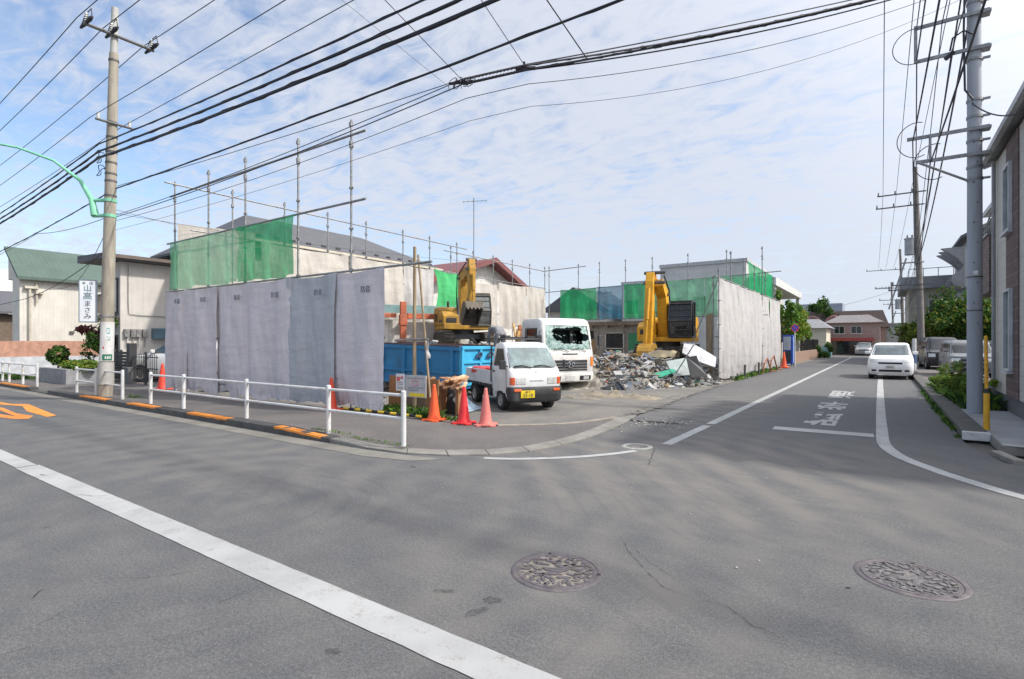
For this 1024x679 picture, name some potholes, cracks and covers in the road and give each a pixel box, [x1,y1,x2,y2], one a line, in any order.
manhole cover [511,552,603,592]
manhole cover [854,558,973,601]
